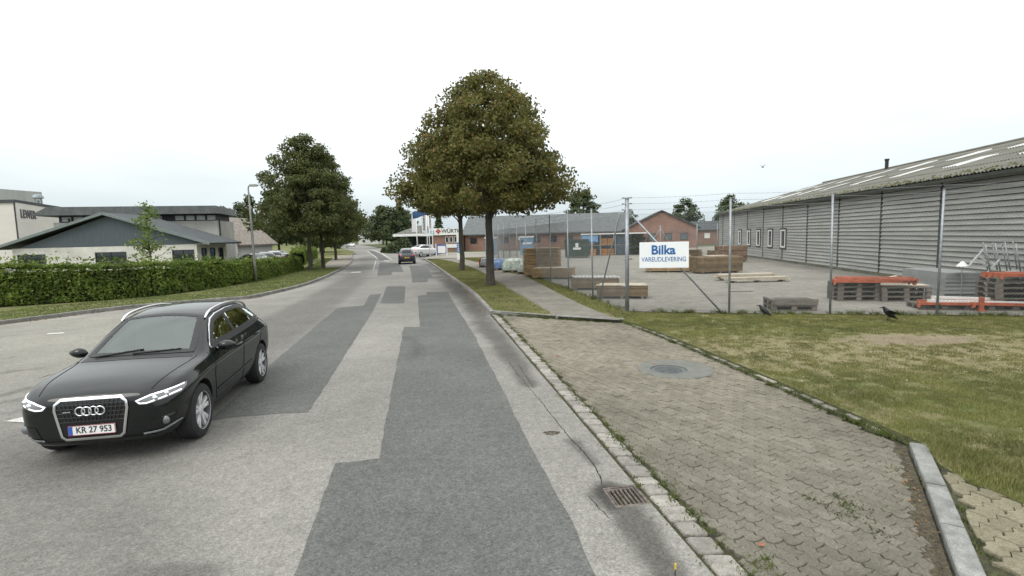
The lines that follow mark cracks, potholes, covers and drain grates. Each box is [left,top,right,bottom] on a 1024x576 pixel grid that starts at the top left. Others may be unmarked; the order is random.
crack [510,364,609,518]
drain grate [602,485,651,507]
manhole cover [637,360,715,379]
